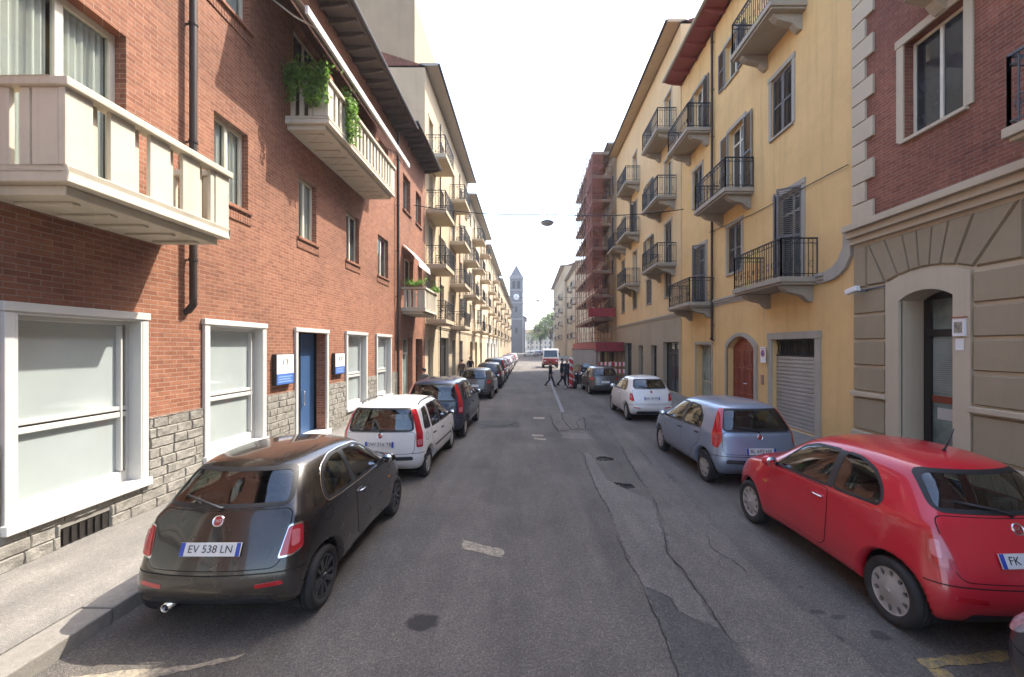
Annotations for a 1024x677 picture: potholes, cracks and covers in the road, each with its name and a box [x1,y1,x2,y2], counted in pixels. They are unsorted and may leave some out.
crack [550,412,589,431]
crack [580,448,748,677]
